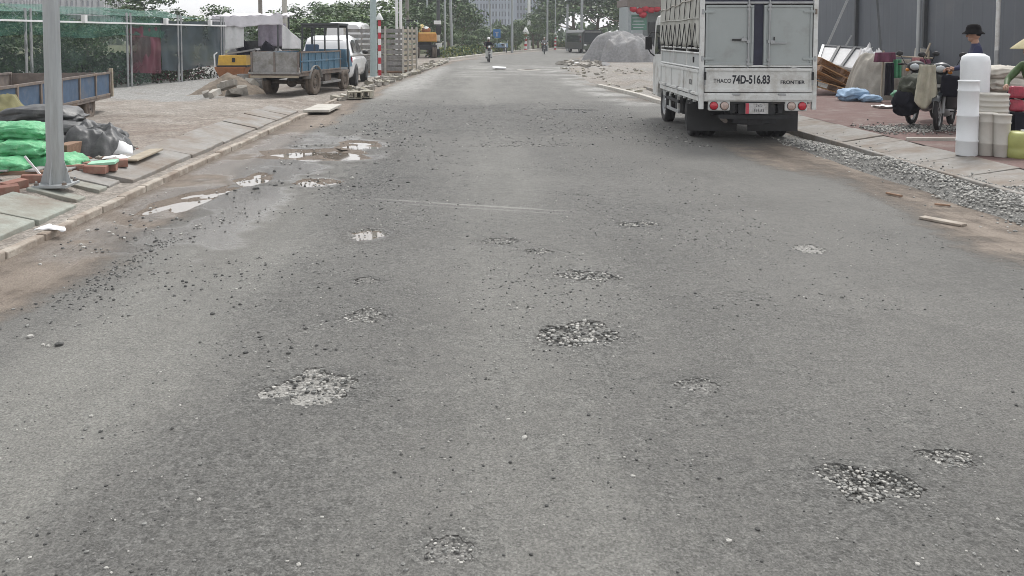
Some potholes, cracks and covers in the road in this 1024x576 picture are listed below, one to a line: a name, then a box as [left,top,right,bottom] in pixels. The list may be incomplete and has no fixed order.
pothole [674,378,721,395]
pothole [901,446,994,473]
pothole [354,276,380,286]
pothole [227,365,366,415]
pothole [519,313,642,353]
pothole [339,307,387,324]
pothole [412,535,477,569]
pothole [346,228,388,241]
pothole [791,241,835,254]
pothole [613,220,664,228]
pothole [290,177,355,187]
pothole [480,237,519,245]
